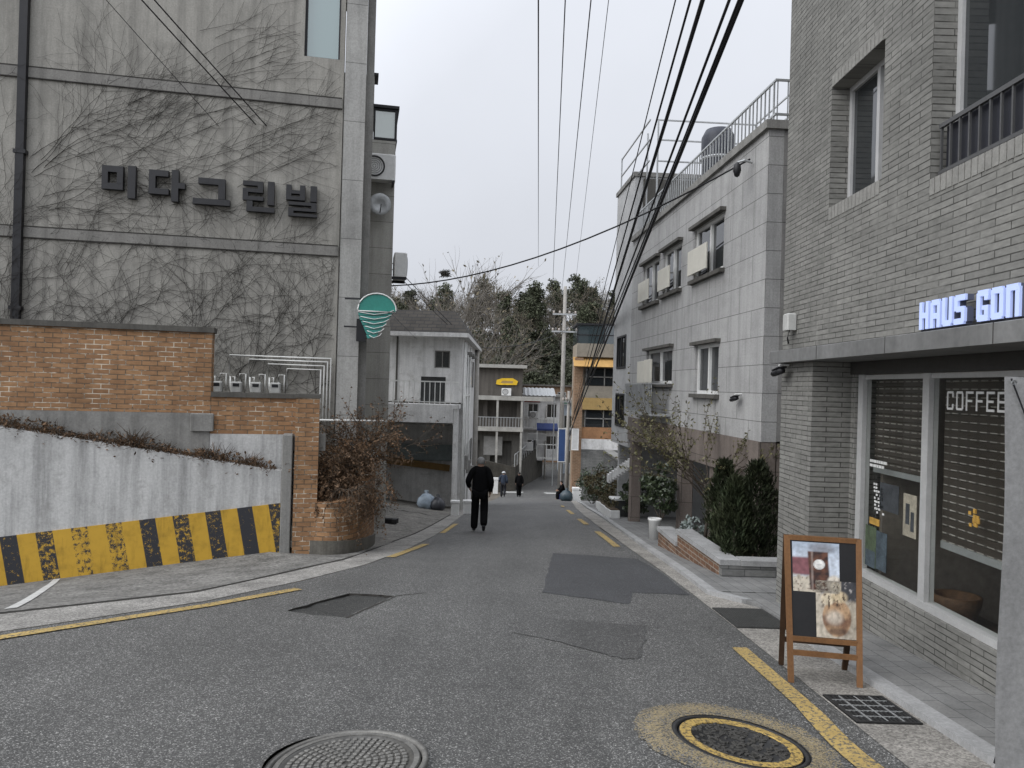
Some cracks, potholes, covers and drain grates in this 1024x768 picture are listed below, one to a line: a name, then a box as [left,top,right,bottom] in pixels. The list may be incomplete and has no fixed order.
manhole cover [264,729,429,768]
manhole cover [672,715,811,768]
drain grate [823,694,923,729]
